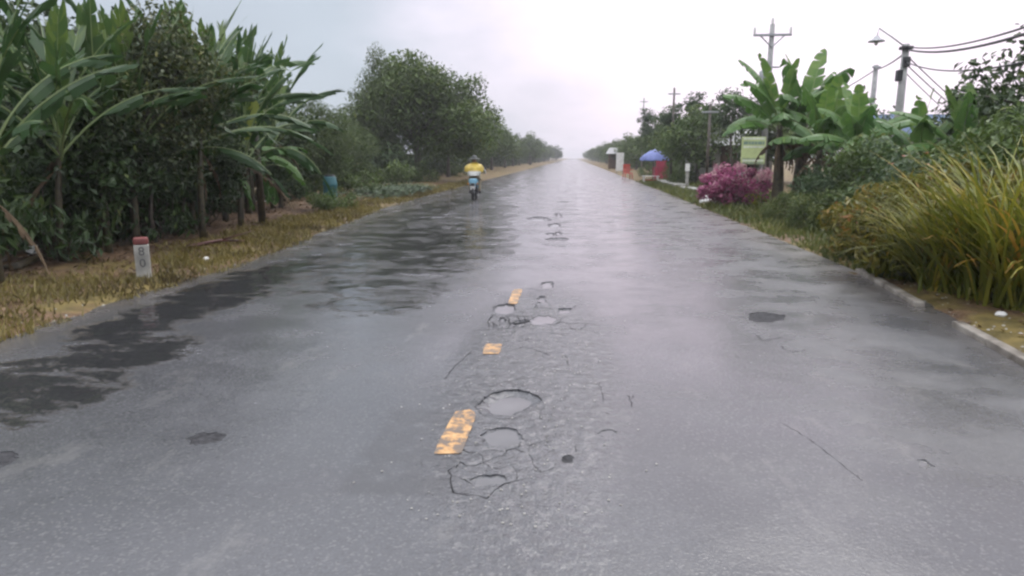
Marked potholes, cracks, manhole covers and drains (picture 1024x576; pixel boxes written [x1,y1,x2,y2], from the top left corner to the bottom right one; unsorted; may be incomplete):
pothole [470,474,507,486]
pothole [478,389,542,415]
pothole [529,315,556,325]
pothole [480,427,524,447]
crack [445,289,600,379]
crack [448,438,554,499]
crack [779,422,863,481]
pothole [492,303,516,314]
